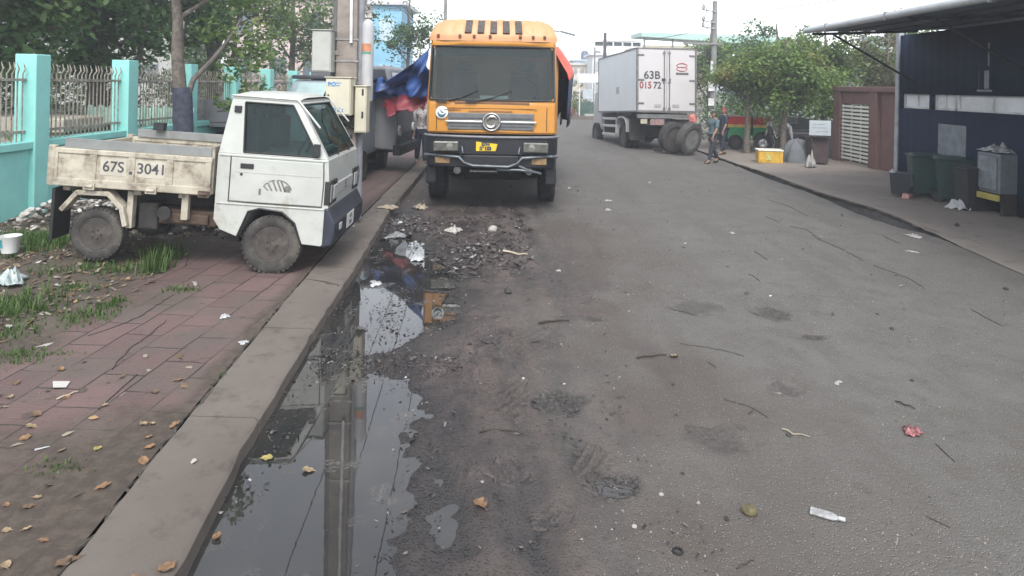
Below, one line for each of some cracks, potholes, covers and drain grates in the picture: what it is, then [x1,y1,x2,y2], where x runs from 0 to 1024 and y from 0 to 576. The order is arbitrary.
pothole [582,472,642,503]
pothole [531,387,593,419]
crack [767,200,925,289]
